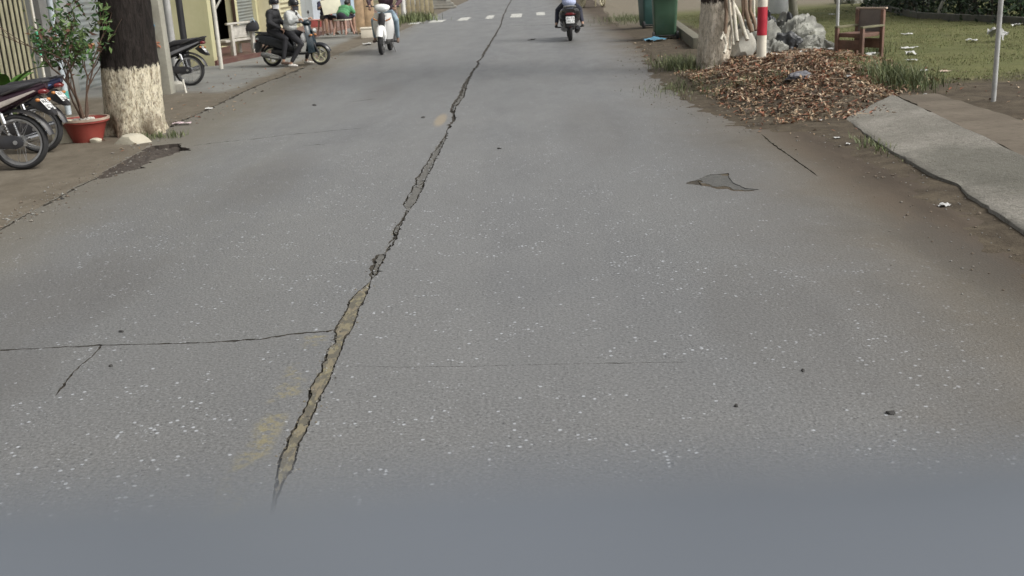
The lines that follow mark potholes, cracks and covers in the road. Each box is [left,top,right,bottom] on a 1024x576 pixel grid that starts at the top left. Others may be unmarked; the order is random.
pothole [686,173,759,191]
pothole [97,144,191,179]
crack [764,136,816,175]
crack [0,0,560,482]
